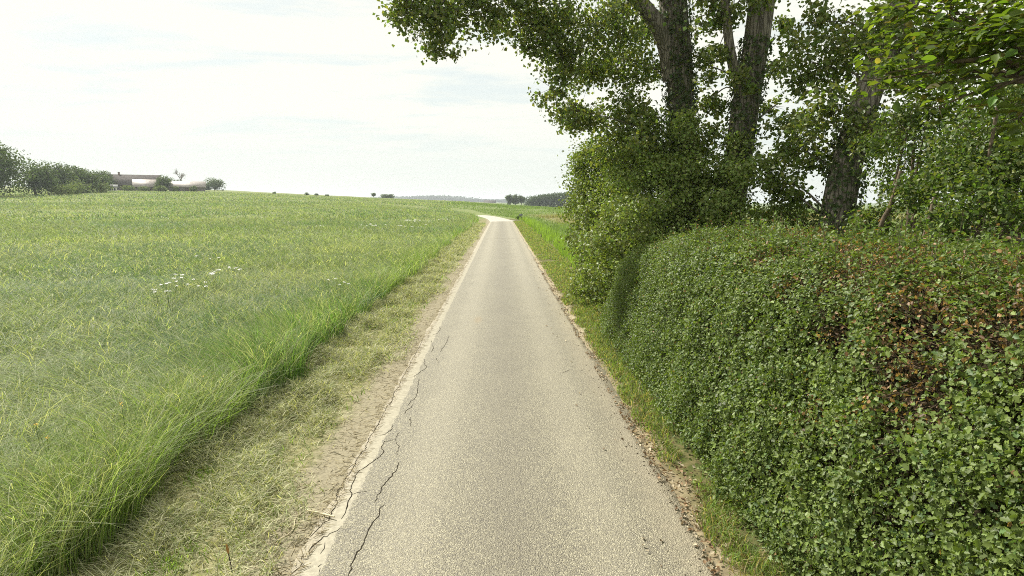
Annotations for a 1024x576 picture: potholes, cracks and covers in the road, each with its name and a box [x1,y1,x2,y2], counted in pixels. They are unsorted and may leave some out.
crack [292,328,449,576]
